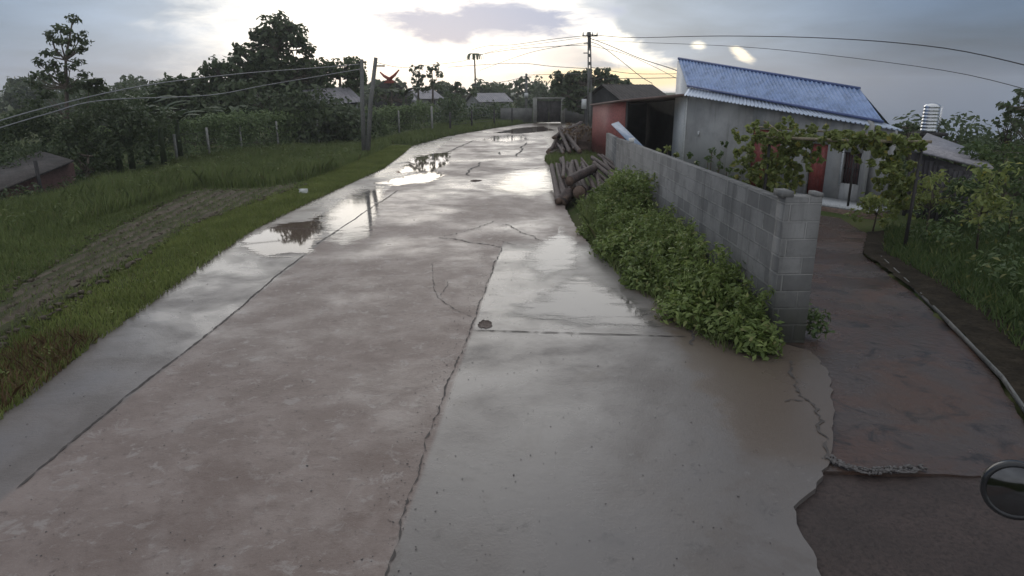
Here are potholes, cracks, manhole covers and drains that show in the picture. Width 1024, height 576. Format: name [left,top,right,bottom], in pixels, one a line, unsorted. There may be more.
crack [784,360,928,475]
crack [385,248,502,576]
crack [448,140,546,176]
crack [439,221,539,247]
